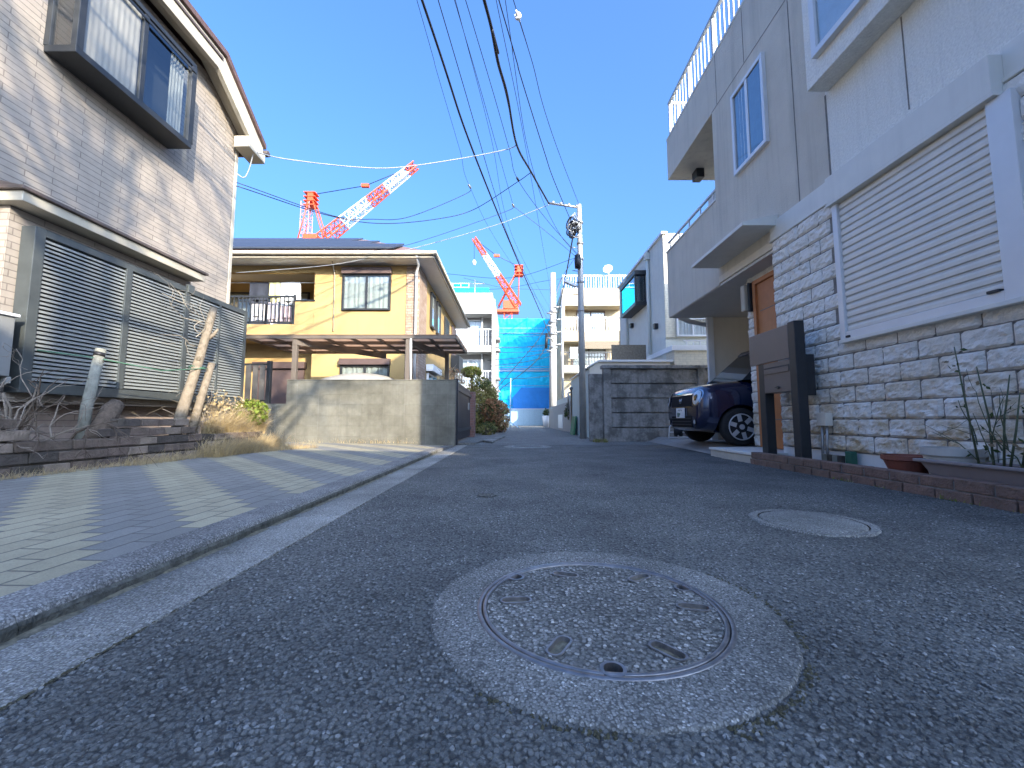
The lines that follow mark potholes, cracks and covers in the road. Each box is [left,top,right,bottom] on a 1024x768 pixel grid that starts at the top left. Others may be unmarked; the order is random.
manhole cover [430,552,804,736]
manhole cover [748,509,882,538]
